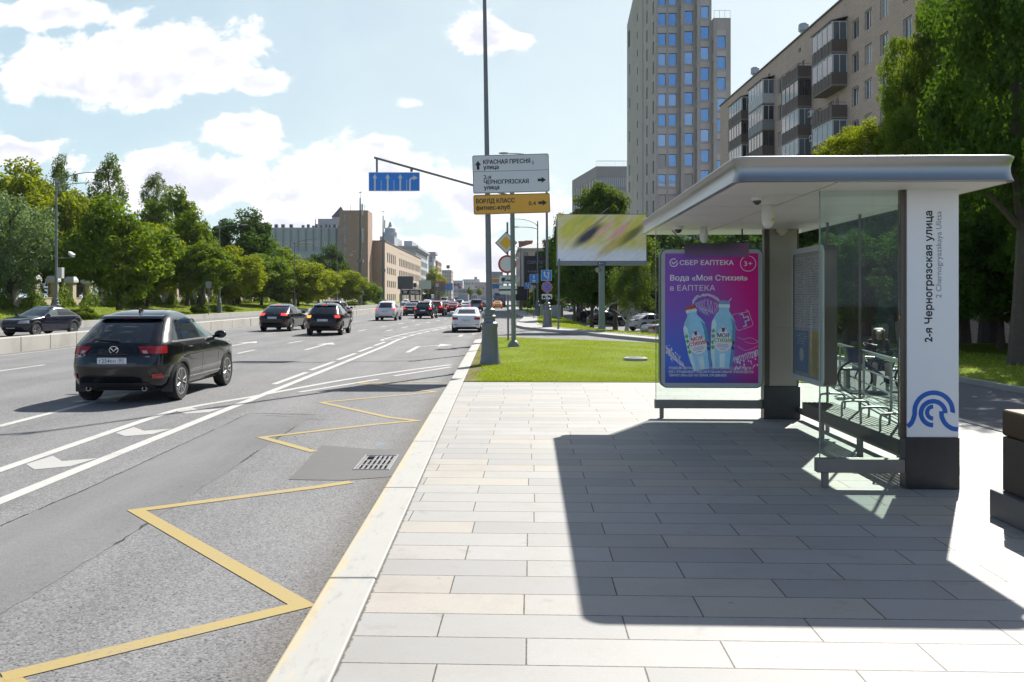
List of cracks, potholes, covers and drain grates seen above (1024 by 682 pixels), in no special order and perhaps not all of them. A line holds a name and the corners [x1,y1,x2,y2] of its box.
drain grate [352,455,399,470]
